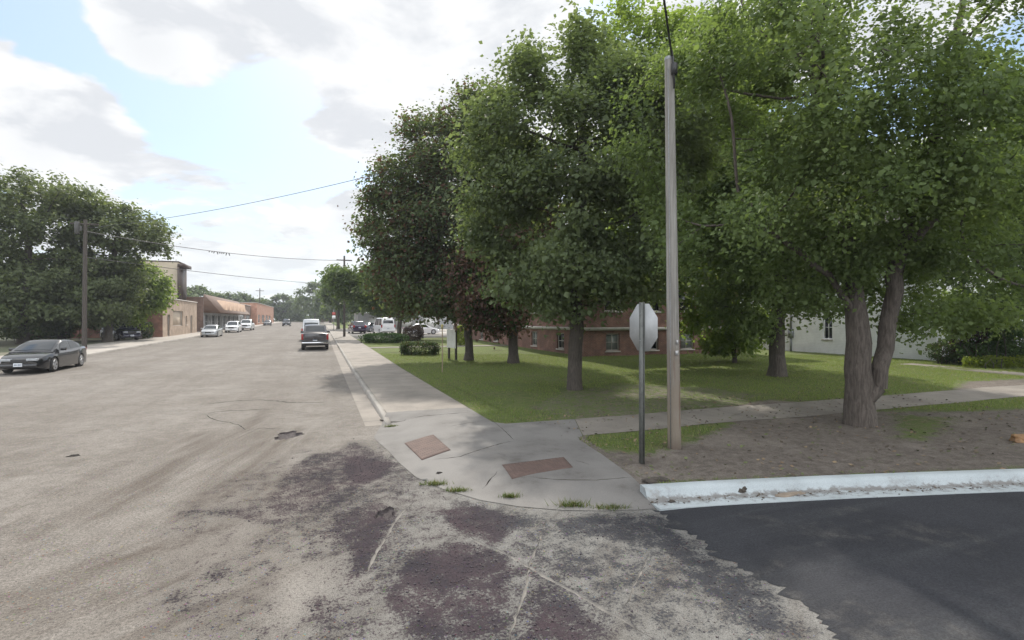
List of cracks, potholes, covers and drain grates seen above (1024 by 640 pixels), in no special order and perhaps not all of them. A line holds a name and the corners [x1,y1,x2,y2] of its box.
crack [463,522,655,640]
pothole [274,431,303,440]
crack [367,505,411,572]
pothole [375,506,395,519]
crack [207,400,315,431]
